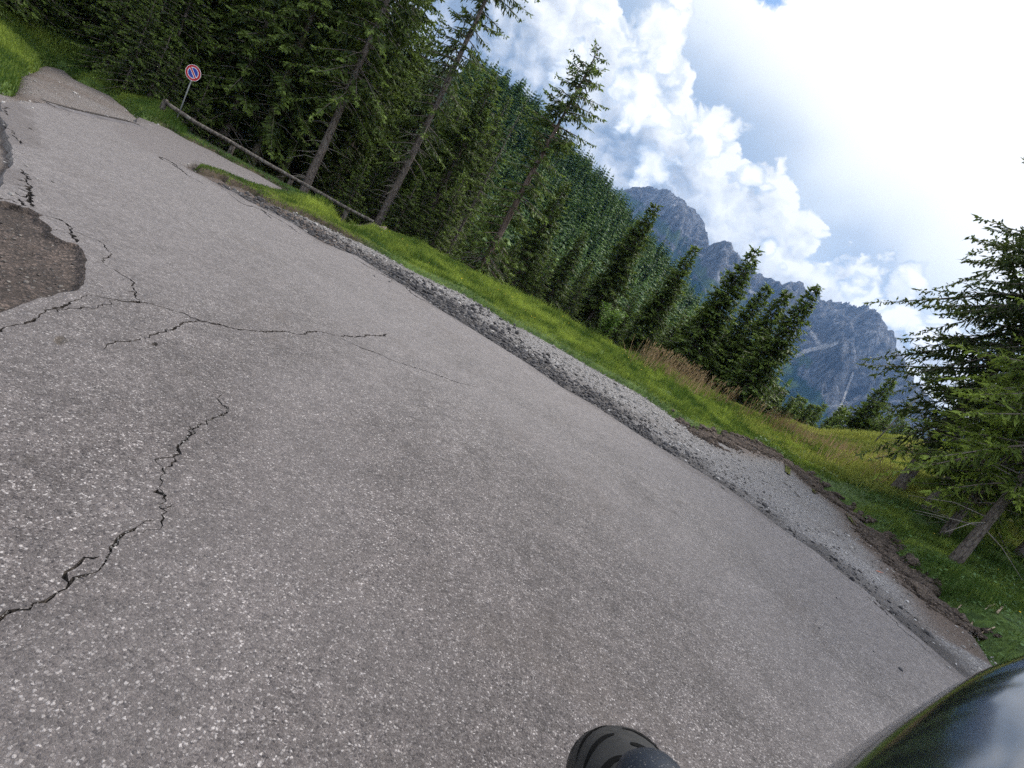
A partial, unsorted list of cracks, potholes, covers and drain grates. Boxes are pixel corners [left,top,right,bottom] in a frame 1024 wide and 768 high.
crack [0,216,474,387]
crack [0,395,229,621]
crack [0,169,35,209]
